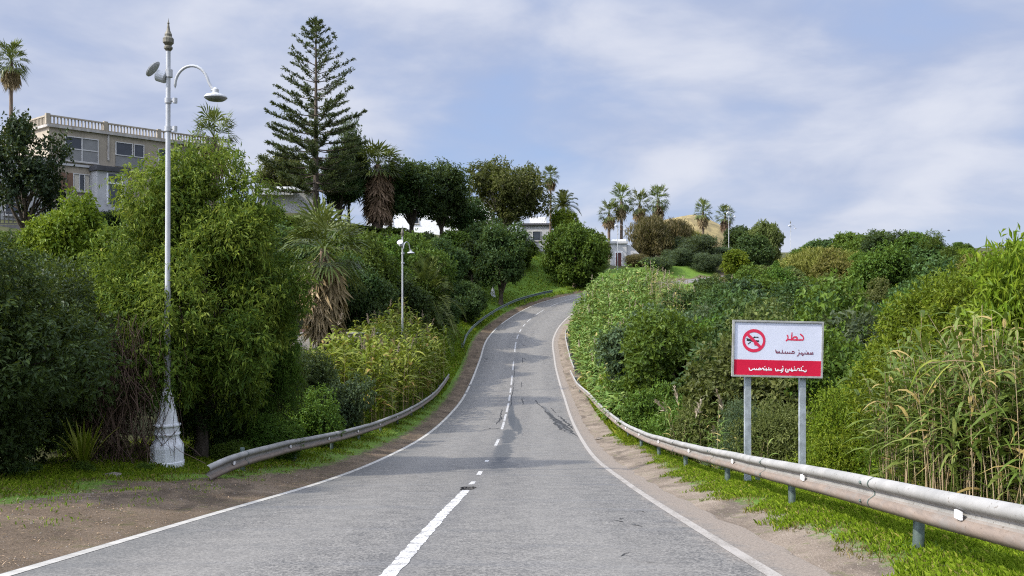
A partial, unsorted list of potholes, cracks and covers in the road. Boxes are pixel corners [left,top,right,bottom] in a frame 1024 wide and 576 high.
crack [489,358,577,436]
